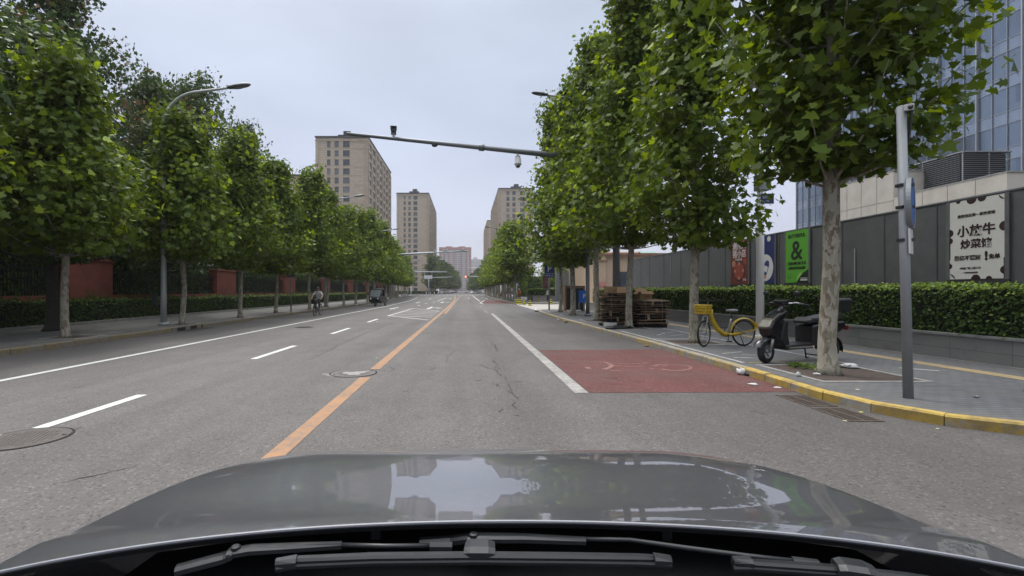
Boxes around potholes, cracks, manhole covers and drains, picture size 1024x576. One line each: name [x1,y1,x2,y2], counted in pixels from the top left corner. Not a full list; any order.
manhole cover [329,369,377,377]
crack [475,343,521,416]
manhole cover [0,427,75,451]
drain grate [810,407,885,422]
drain grate [776,395,838,407]
